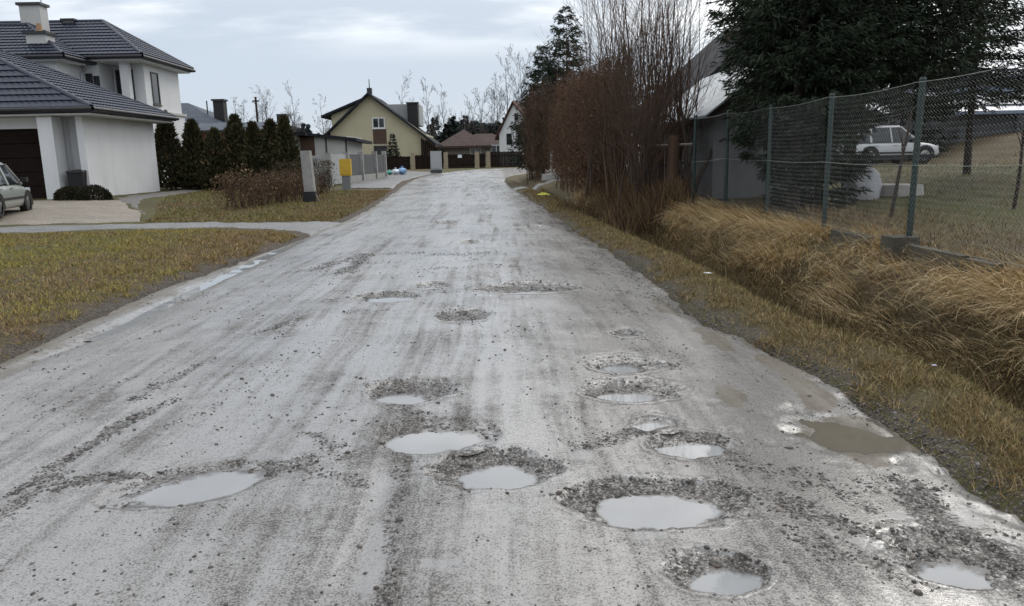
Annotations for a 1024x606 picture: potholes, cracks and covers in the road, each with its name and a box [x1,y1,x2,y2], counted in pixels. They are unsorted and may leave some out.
pothole [865,518,1024,596]
pothole [367,412,519,458]
pothole [649,542,778,599]
pothole [606,328,648,339]
pothole [582,352,672,375]
pothole [76,454,296,513]
pothole [346,290,427,303]
pothole [539,471,778,536]
pothole [623,412,687,434]
pothole [638,426,744,461]
pothole [358,374,470,406]
